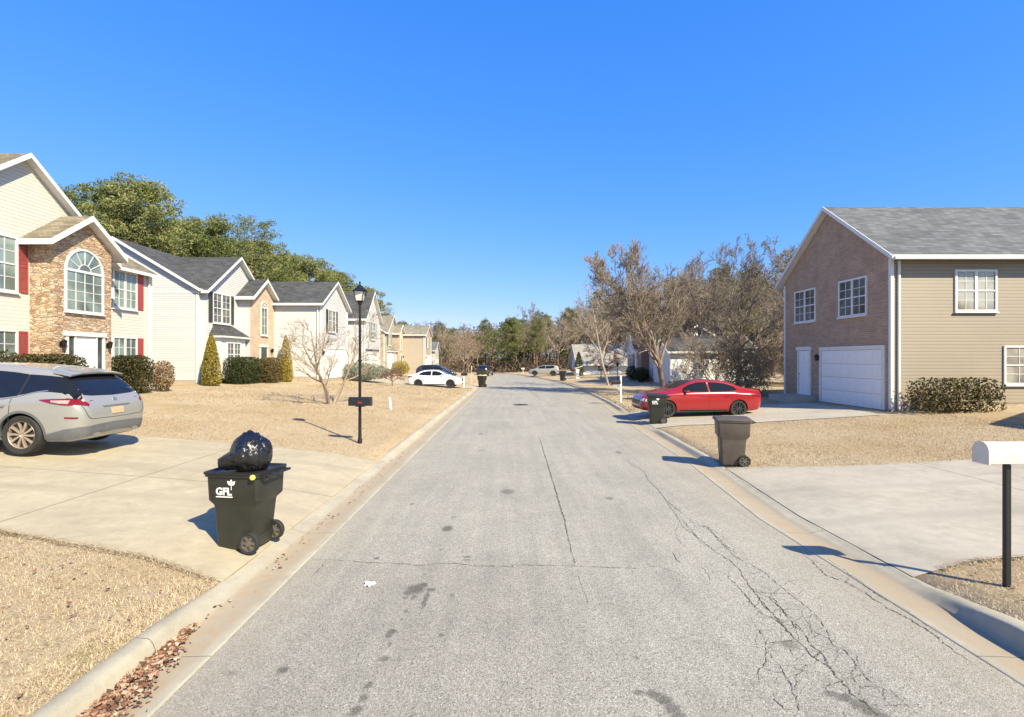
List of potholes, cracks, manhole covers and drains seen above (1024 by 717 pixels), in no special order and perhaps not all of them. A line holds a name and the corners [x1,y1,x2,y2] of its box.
crack [801,552,967,659]
crack [314,437,685,610]
crack [621,455,907,714]
